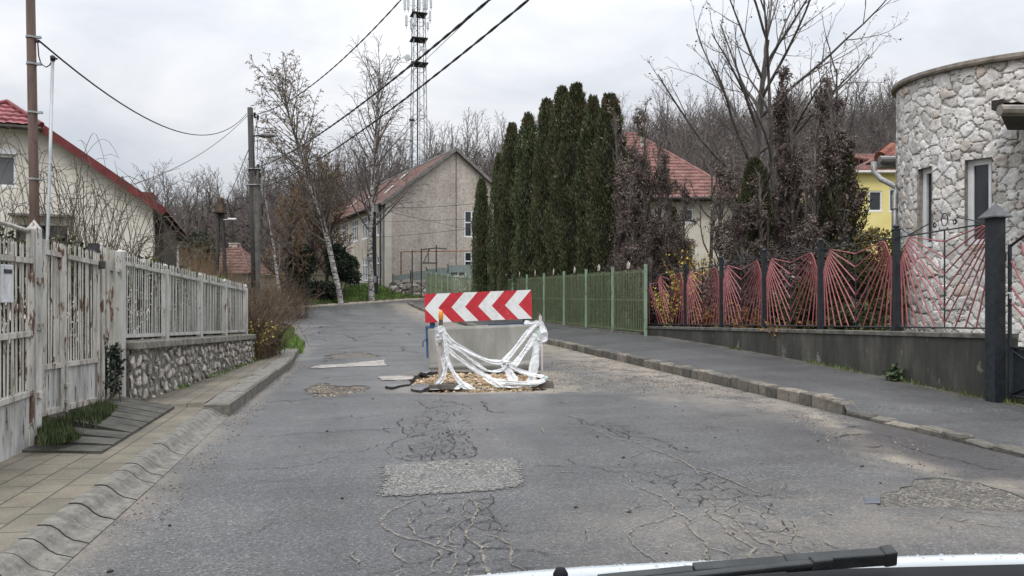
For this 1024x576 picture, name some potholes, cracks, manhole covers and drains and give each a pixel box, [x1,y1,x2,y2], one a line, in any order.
pothole [304,383,370,397]
crack [351,494,552,575]
pothole [410,371,547,393]
crack [216,395,494,486]
crack [559,400,842,562]
